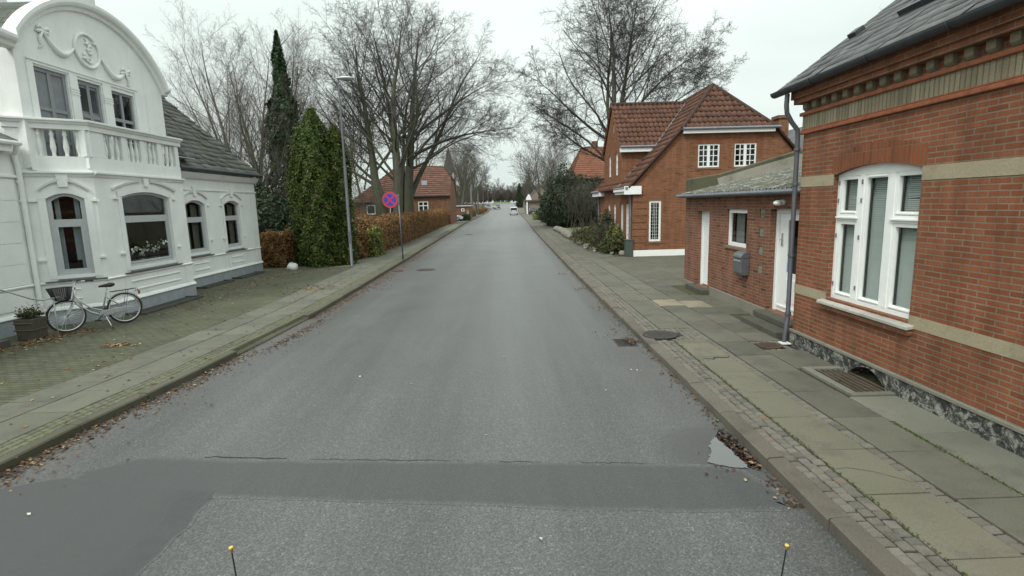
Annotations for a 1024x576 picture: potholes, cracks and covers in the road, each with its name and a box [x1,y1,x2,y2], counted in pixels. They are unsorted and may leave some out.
manhole cover [643,330,678,340]
pothole [716,430,761,470]
drain grate [613,339,638,347]
manhole cover [757,342,782,350]
